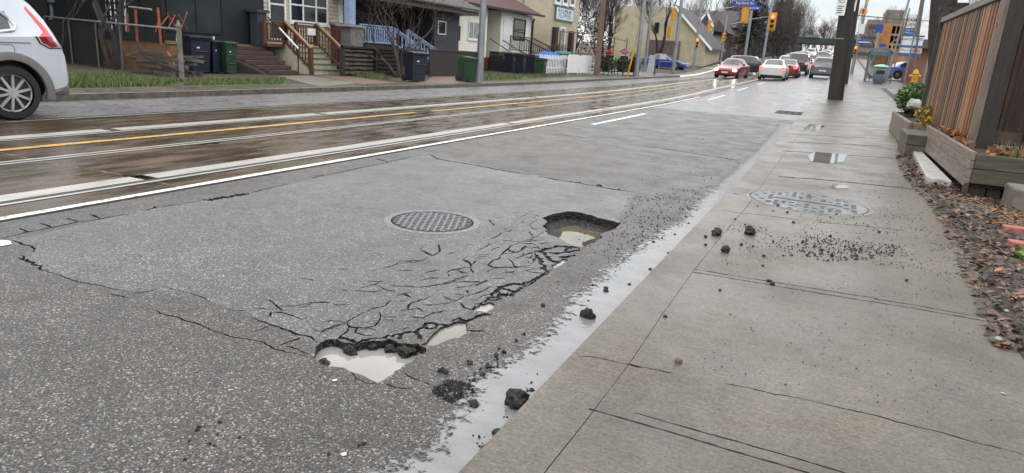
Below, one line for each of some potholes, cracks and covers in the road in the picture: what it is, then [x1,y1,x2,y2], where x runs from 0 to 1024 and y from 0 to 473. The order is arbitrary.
pothole [422,321,468,346]
manhole cover [746,190,873,216]
manhole cover [383,210,481,234]
pothole [543,211,621,247]
crack [12,211,580,358]
pothole [313,338,426,383]
pothole [472,302,495,312]
